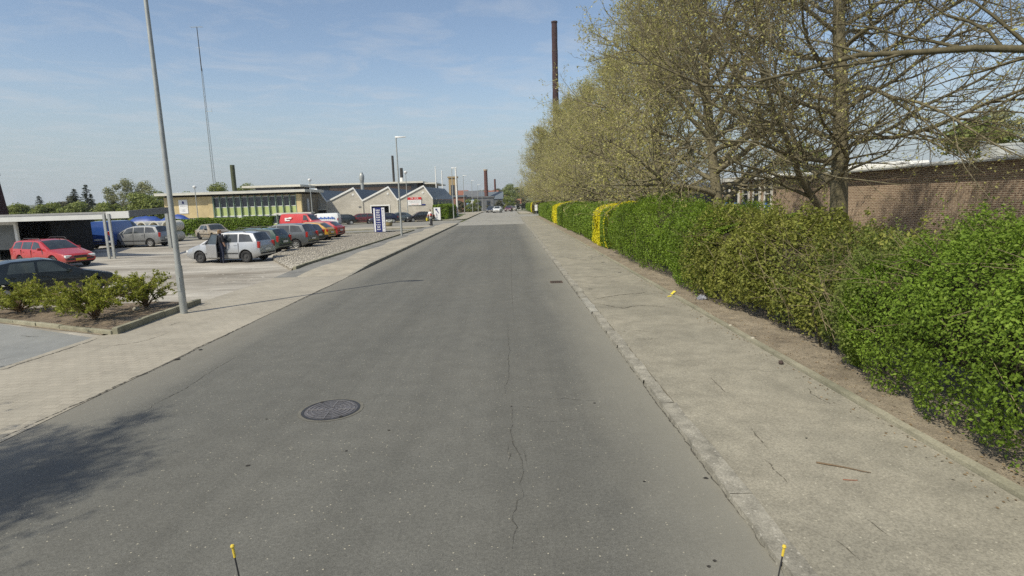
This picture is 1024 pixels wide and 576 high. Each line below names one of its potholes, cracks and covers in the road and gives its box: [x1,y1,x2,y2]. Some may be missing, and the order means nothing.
manhole cover [297,398,364,422]
crack [504,337,526,547]
